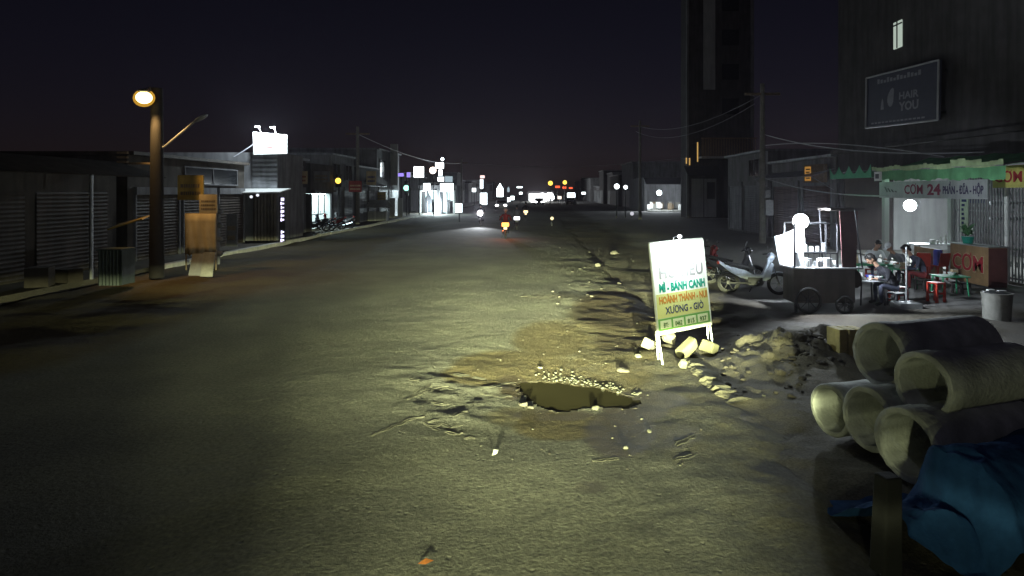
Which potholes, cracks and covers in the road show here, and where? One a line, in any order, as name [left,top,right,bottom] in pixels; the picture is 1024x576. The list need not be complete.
pothole [512,380,644,413]
crack [371,373,513,439]
